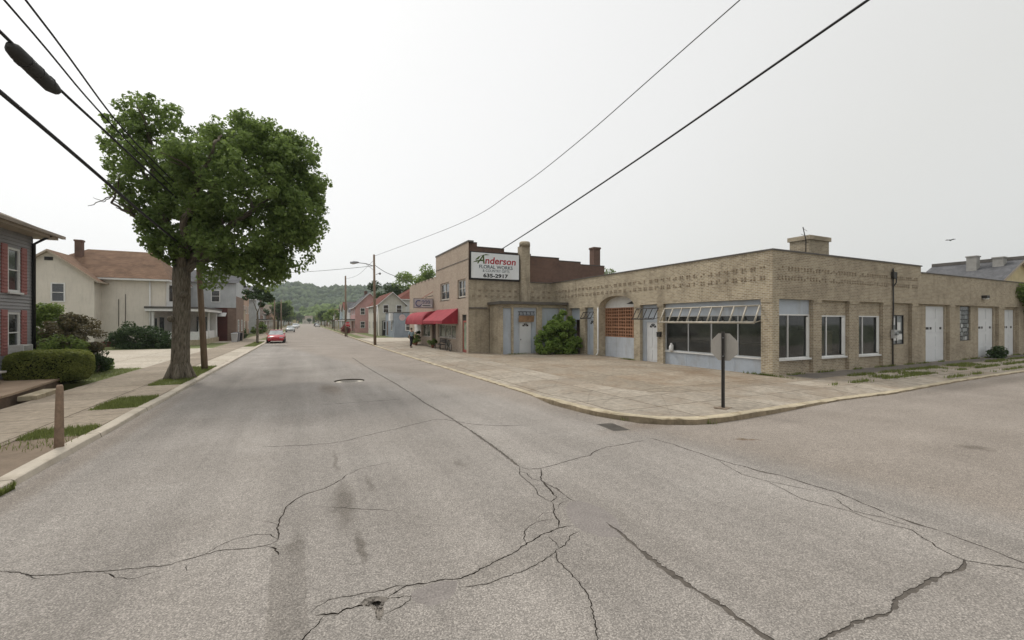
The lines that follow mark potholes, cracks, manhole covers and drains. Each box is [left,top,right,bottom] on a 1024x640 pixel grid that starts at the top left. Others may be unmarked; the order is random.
pothole [360,596,389,621]
crack [819,559,967,640]
crack [1,463,383,579]
crack [270,358,774,640]
drain grate [597,423,629,431]
